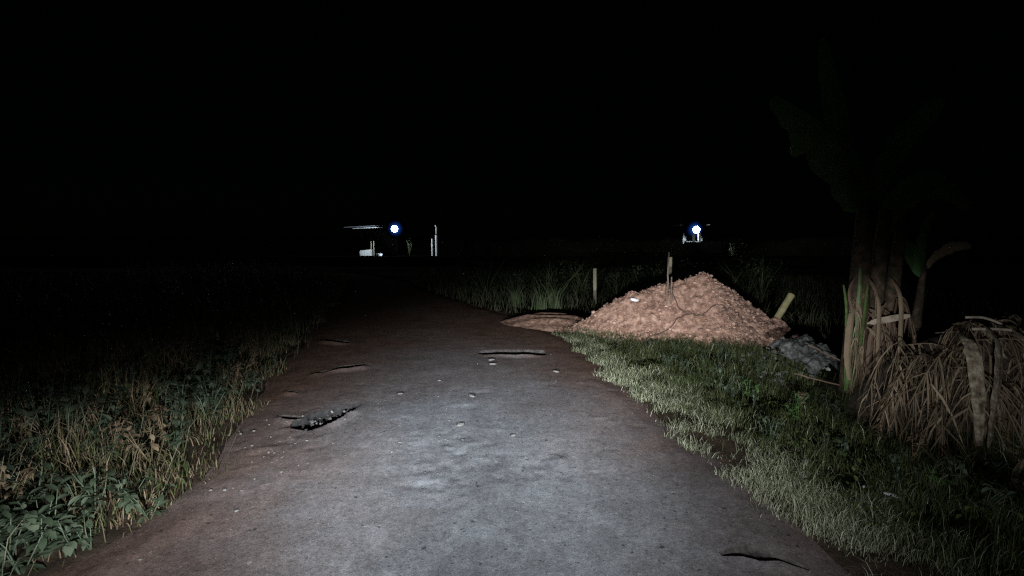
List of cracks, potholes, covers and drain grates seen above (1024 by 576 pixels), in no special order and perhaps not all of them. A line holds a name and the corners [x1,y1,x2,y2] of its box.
pothole [290,404,361,431]
